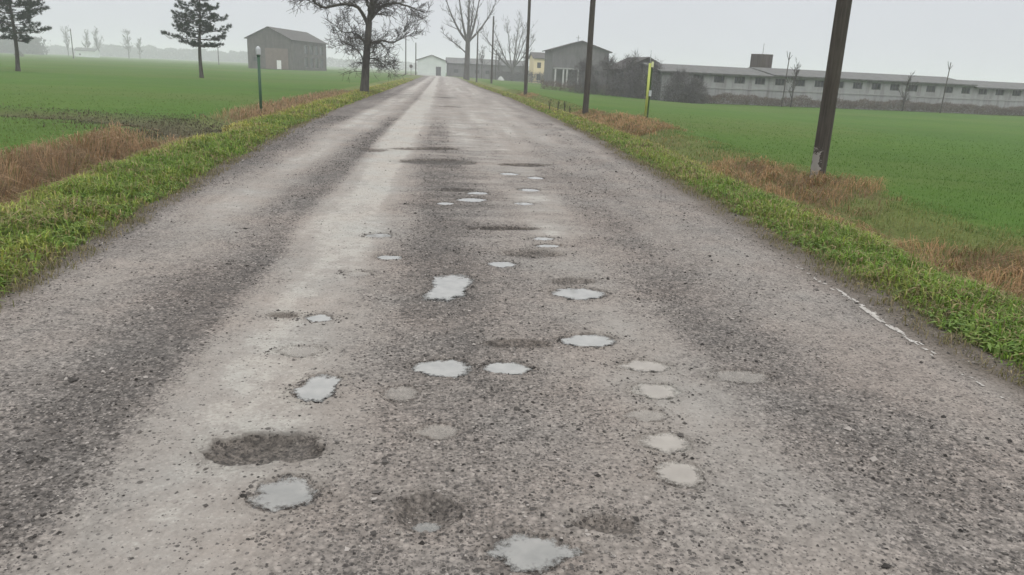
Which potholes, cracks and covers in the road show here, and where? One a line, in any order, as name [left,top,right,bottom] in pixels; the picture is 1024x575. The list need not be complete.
pothole [477,360,540,376]
pothole [386,487,471,538]
pothole [236,470,332,517]
pothole [610,357,678,374]
pothole [475,525,594,575]
pothole [406,357,477,379]
pothole [191,429,334,470]
pothole [418,271,478,303]
pothole [283,370,349,406]
pothole [632,429,696,456]
pothole [553,332,620,348]
pothole [624,380,687,403]
